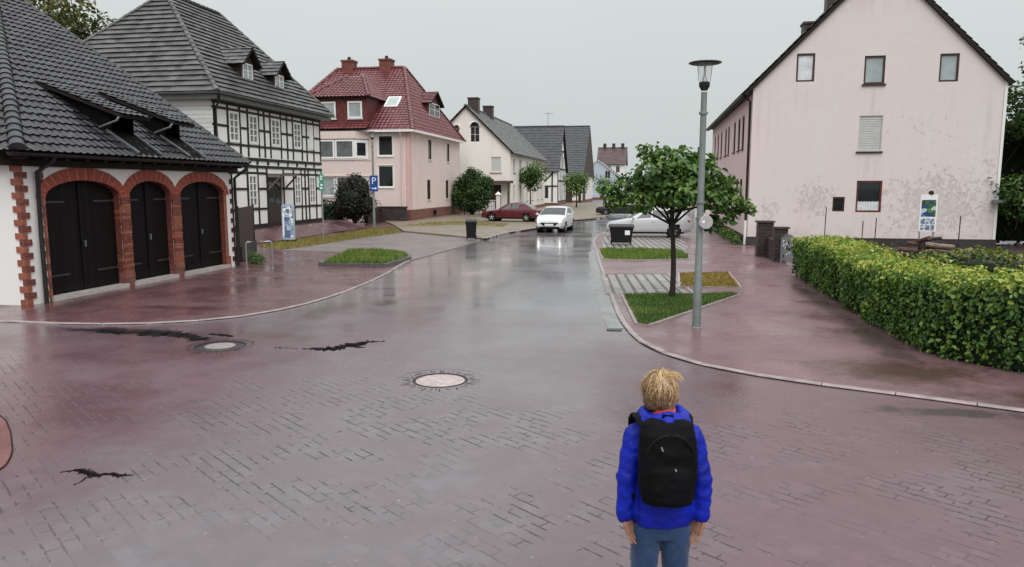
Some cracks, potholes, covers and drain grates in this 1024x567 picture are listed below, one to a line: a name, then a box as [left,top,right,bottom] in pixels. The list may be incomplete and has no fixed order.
manhole cover [396,369,484,392]
crack [274,340,385,352]
manhole cover [185,339,254,354]
crack [59,468,133,485]
